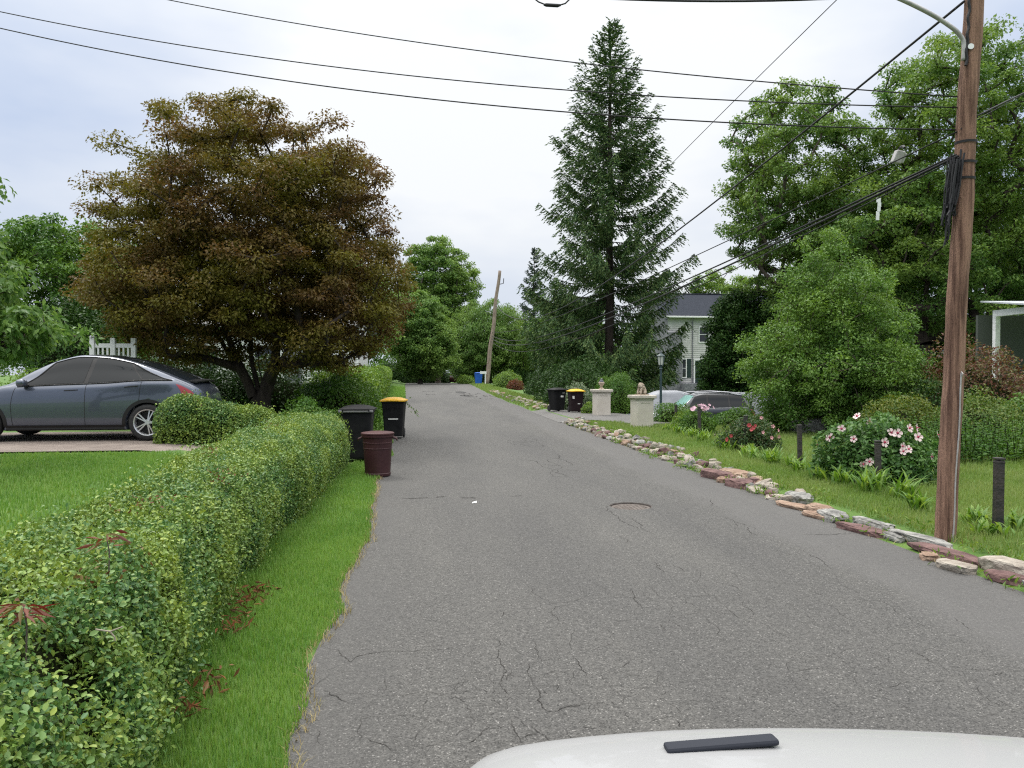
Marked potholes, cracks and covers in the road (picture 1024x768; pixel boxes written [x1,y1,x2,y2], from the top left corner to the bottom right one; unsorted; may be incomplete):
manhole cover [609,502,652,510]
crack [531,553,911,649]
crack [309,612,685,749]
